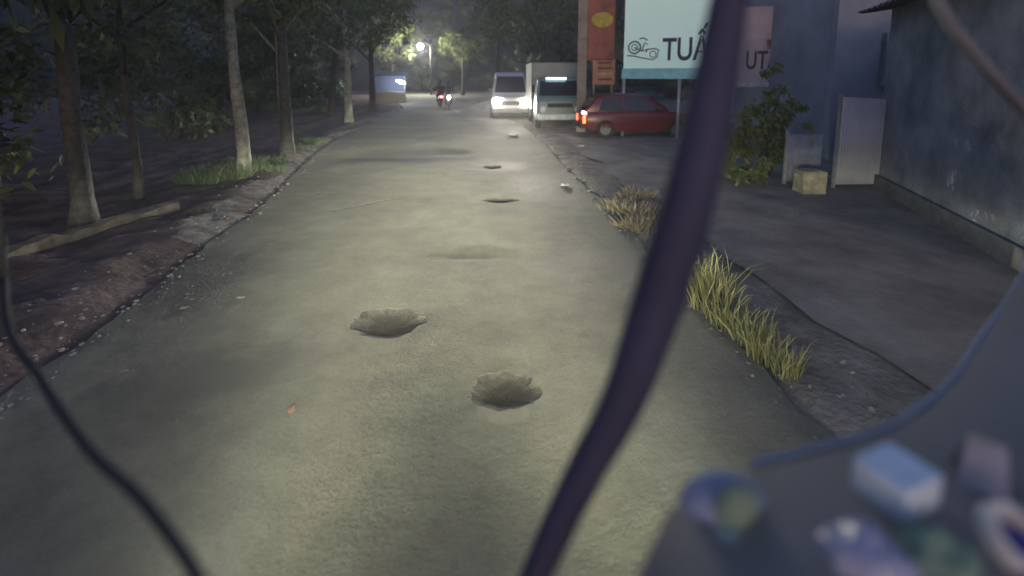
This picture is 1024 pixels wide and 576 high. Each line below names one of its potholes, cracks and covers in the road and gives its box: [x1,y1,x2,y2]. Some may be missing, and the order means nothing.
pothole [471,370,543,411]
pothole [349,307,428,339]
